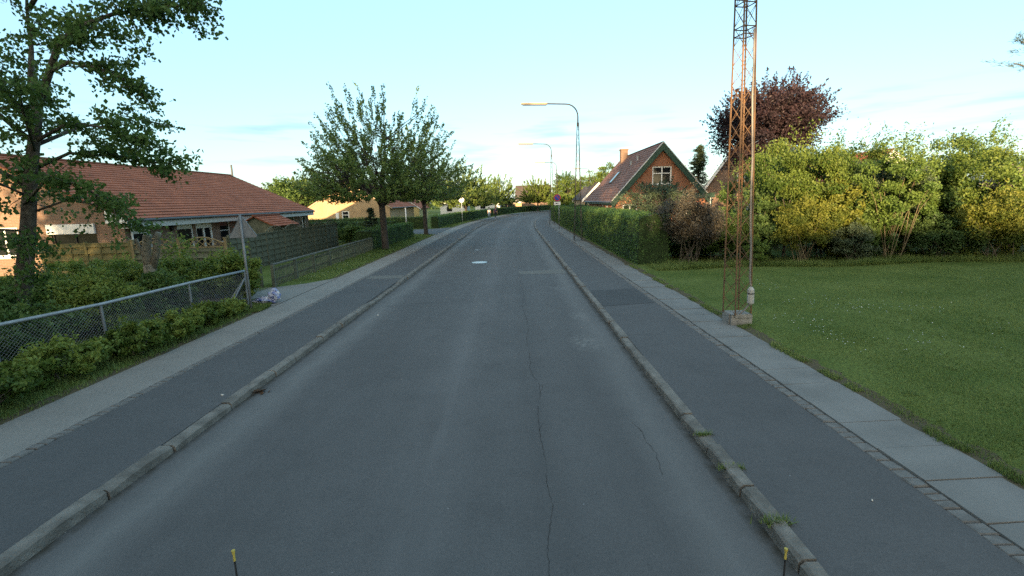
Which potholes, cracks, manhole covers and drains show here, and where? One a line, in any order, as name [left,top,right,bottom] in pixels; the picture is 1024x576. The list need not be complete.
crack [522,307,553,576]
